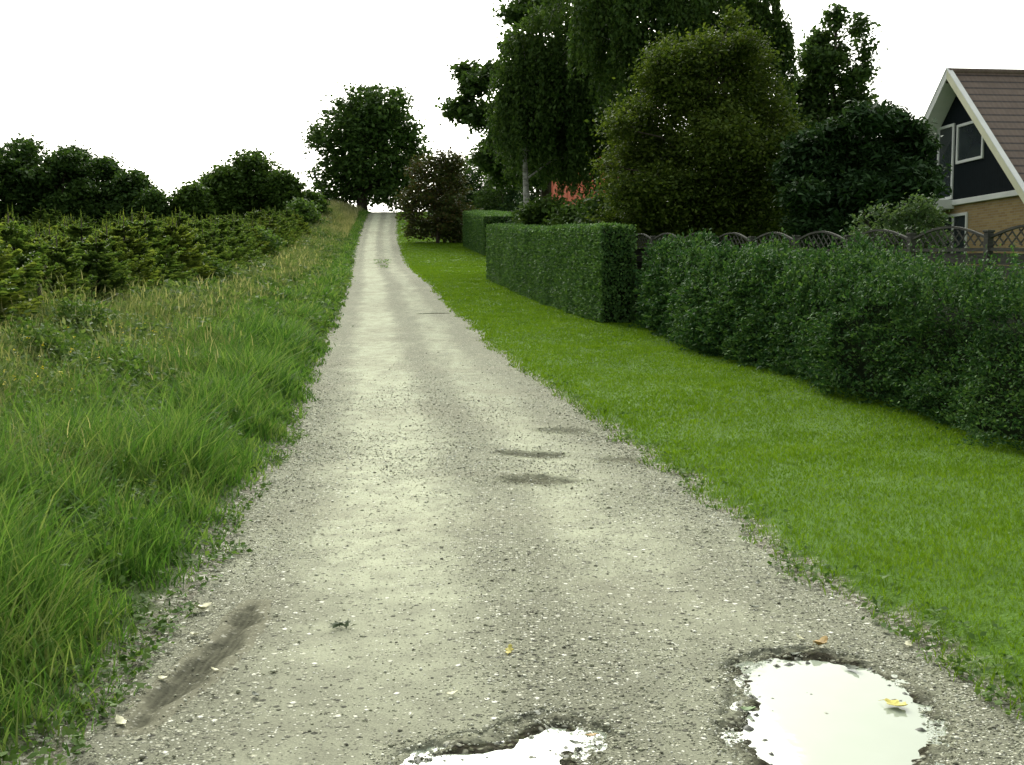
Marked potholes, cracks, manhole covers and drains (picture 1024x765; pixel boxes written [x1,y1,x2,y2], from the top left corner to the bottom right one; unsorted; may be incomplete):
pothole [711,647,965,765]
pothole [391,711,614,765]
